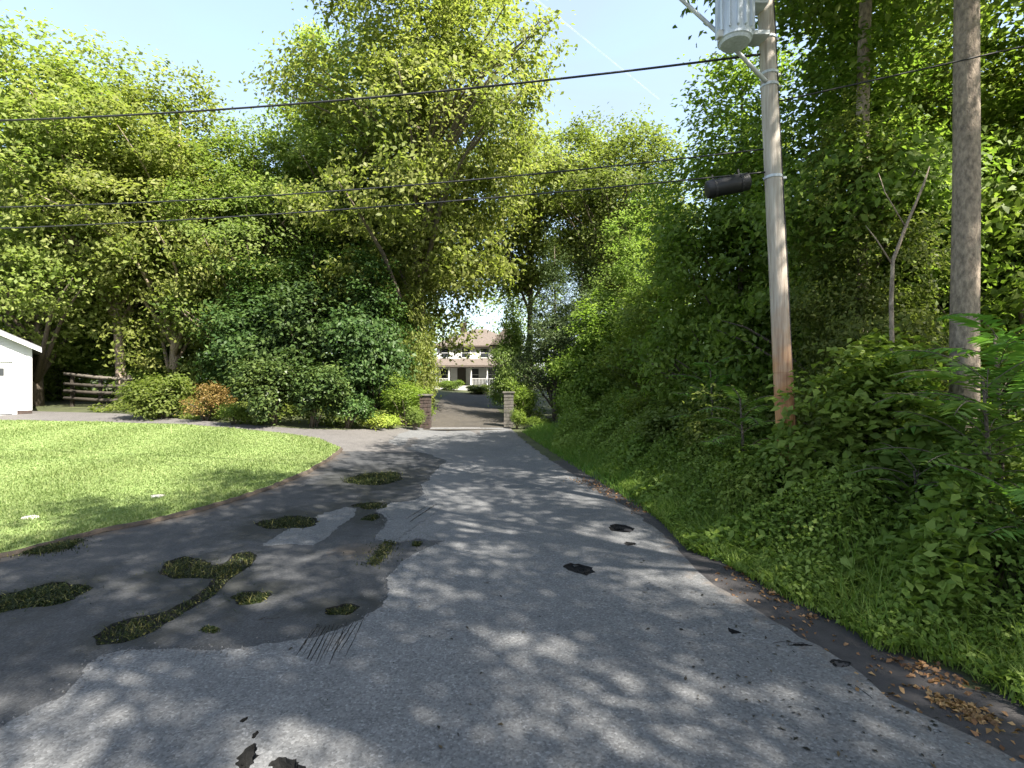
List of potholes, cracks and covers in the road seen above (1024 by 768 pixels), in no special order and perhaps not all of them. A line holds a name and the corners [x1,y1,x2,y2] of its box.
pothole [93,551,257,645]
crack [297,620,363,664]
pothole [268,757,306,768]
pothole [0,582,92,613]
pothole [235,743,259,768]
pothole [563,563,595,576]
pothole [255,516,319,529]
pothole [609,524,634,532]
